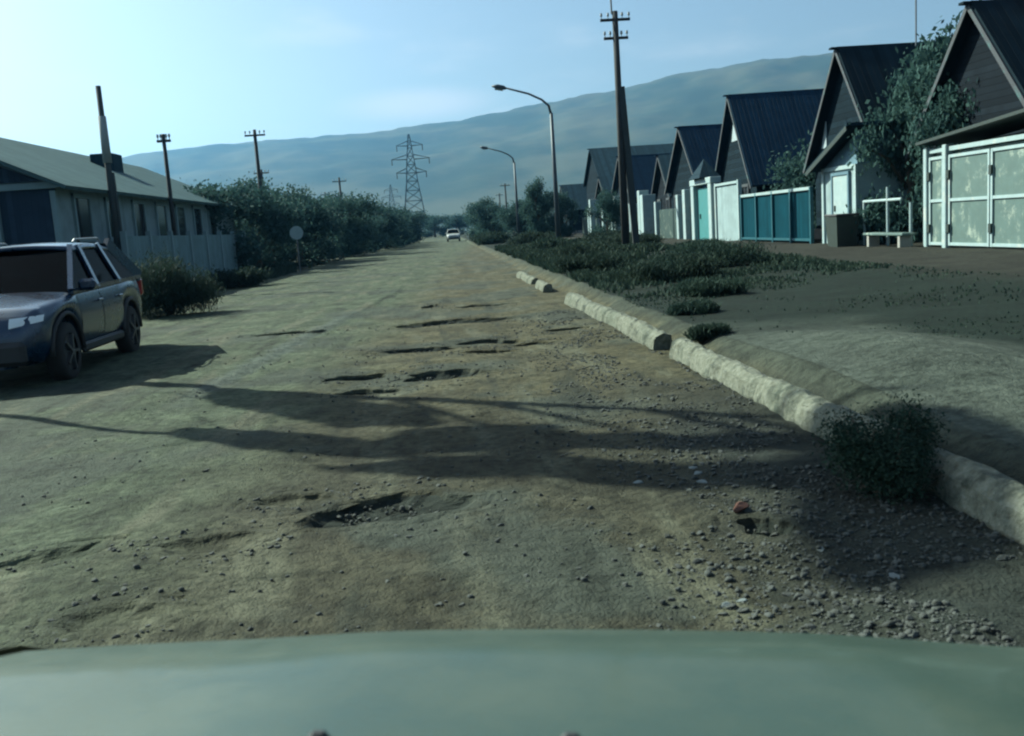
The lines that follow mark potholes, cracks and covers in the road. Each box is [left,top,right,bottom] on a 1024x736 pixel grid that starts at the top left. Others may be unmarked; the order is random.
pothole [446,338,535,348]
pothole [368,345,478,356]
pothole [312,371,398,384]
pothole [278,486,495,533]
pothole [243,329,335,337]
pothole [391,367,504,385]
pothole [378,314,539,330]
pothole [717,510,824,547]
pothole [534,325,597,333]
